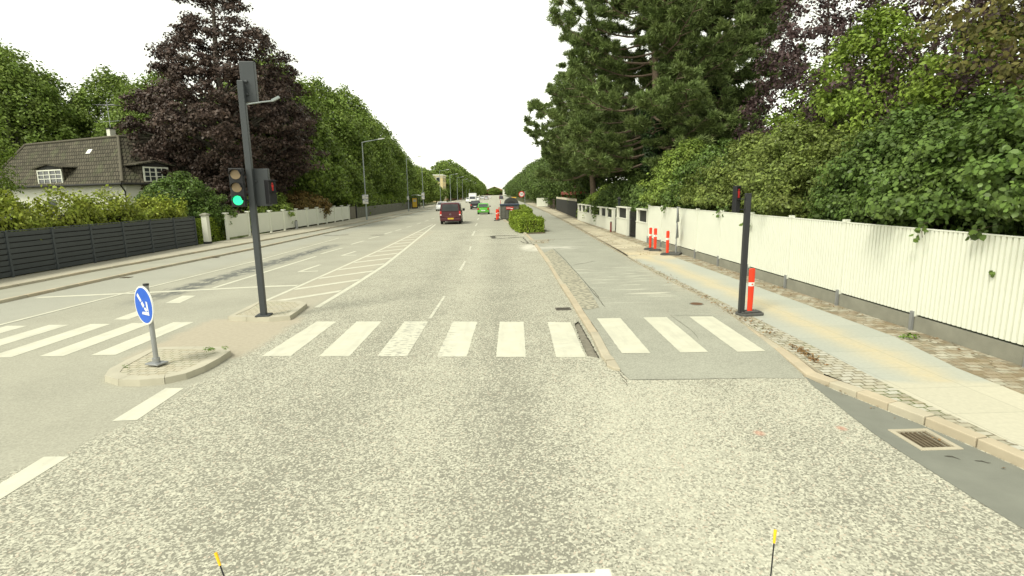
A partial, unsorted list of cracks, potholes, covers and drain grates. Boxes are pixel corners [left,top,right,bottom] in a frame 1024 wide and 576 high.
drain grate [888,428,964,451]
